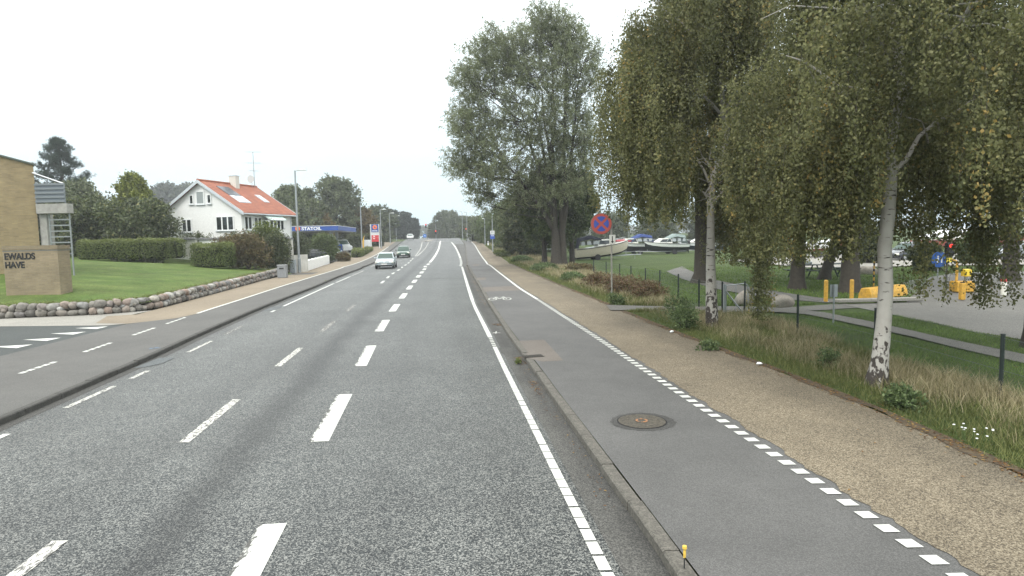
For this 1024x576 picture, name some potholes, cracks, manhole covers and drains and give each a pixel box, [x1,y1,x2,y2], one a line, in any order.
manhole cover [610,412,677,431]
